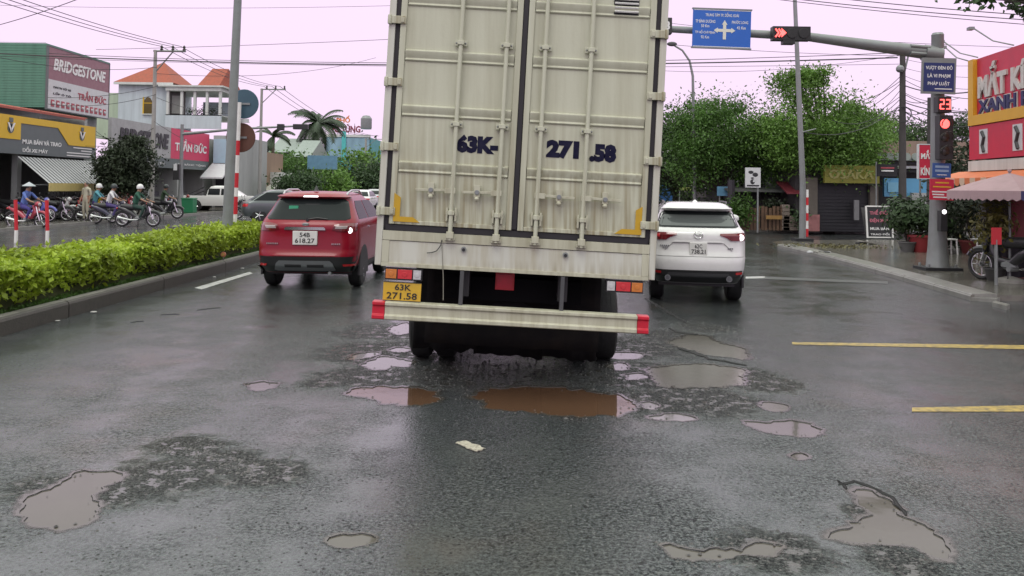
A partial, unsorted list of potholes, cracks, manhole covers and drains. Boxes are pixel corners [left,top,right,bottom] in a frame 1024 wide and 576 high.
pothole [641,363,752,389]
pothole [757,401,791,412]
pothole [787,452,812,461]
pothole [13,468,129,533]
pothole [242,380,281,391]
pothole [323,532,379,549]
pothole [740,419,827,438]
pothole [821,486,958,563]
pothole [645,412,699,422]
pothole [666,334,754,361]
pothole [658,539,787,562]
pothole [465,385,641,418]
